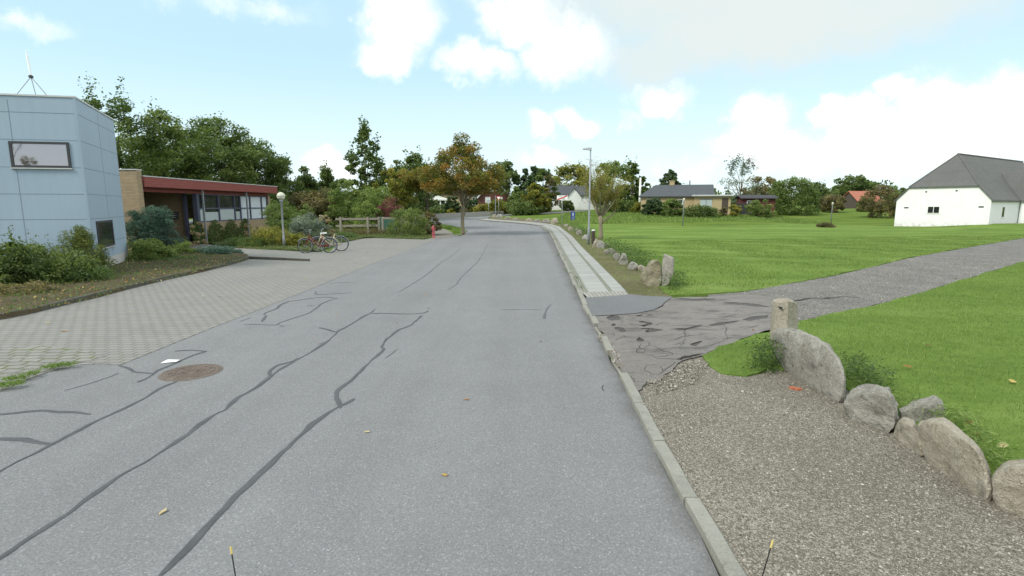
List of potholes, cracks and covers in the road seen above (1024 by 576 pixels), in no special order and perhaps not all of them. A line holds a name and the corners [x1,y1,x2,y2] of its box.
manhole cover [158,364,223,381]
crack [613,309,759,382]
crack [399,244,488,292]
crack [507,306,550,319]
